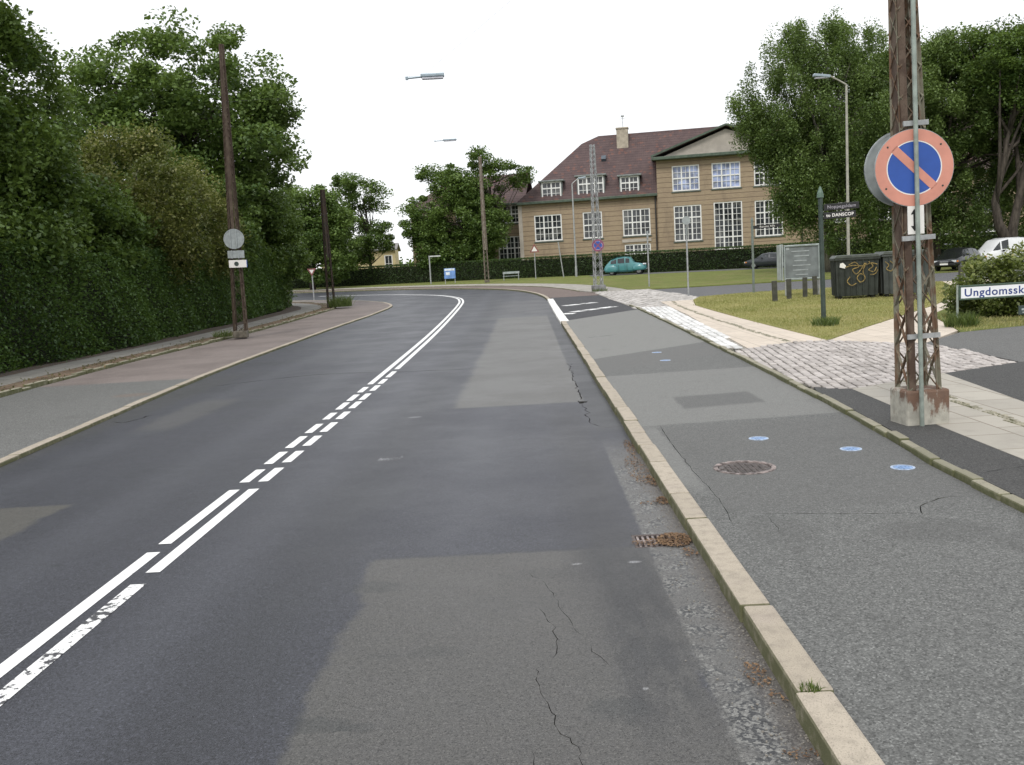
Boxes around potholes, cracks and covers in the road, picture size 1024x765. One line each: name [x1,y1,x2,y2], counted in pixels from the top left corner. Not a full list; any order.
crack [532,576,609,765]
drain grate [631,533,690,548]
crack [661,428,733,524]
crack [768,496,956,531]
manhole cover [713,460,776,475]
